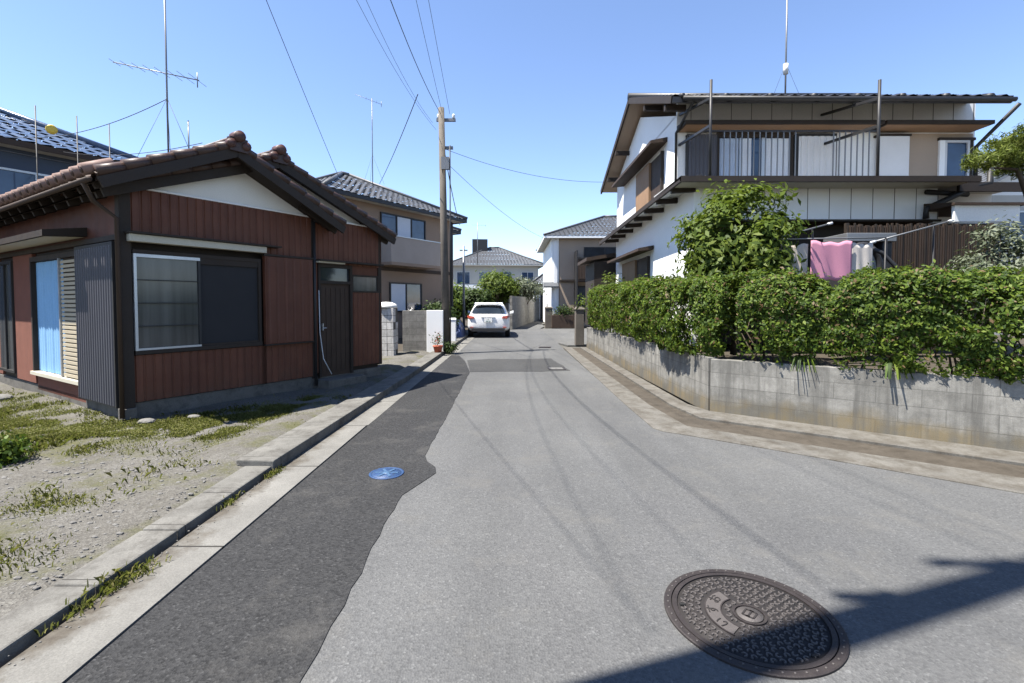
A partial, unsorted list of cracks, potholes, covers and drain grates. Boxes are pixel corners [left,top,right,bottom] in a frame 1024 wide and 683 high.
manhole cover [664,569,850,680]
utility cover [369,467,404,480]
